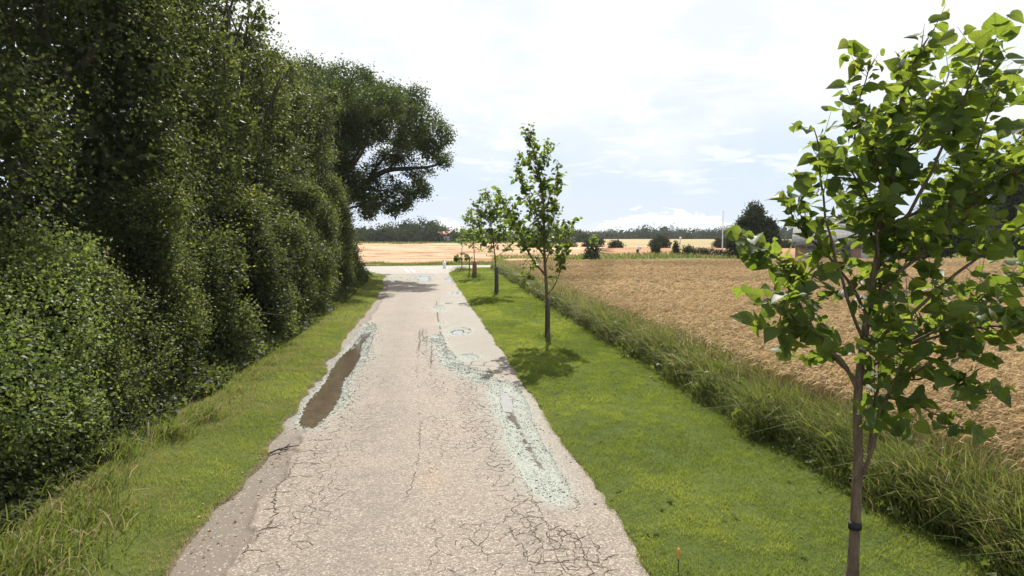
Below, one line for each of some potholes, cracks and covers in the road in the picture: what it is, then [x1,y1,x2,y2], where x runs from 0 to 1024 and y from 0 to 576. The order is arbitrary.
pothole [434,326,476,336]
pothole [283,322,390,434]
crack [231,352,394,576]
crack [406,329,617,576]
